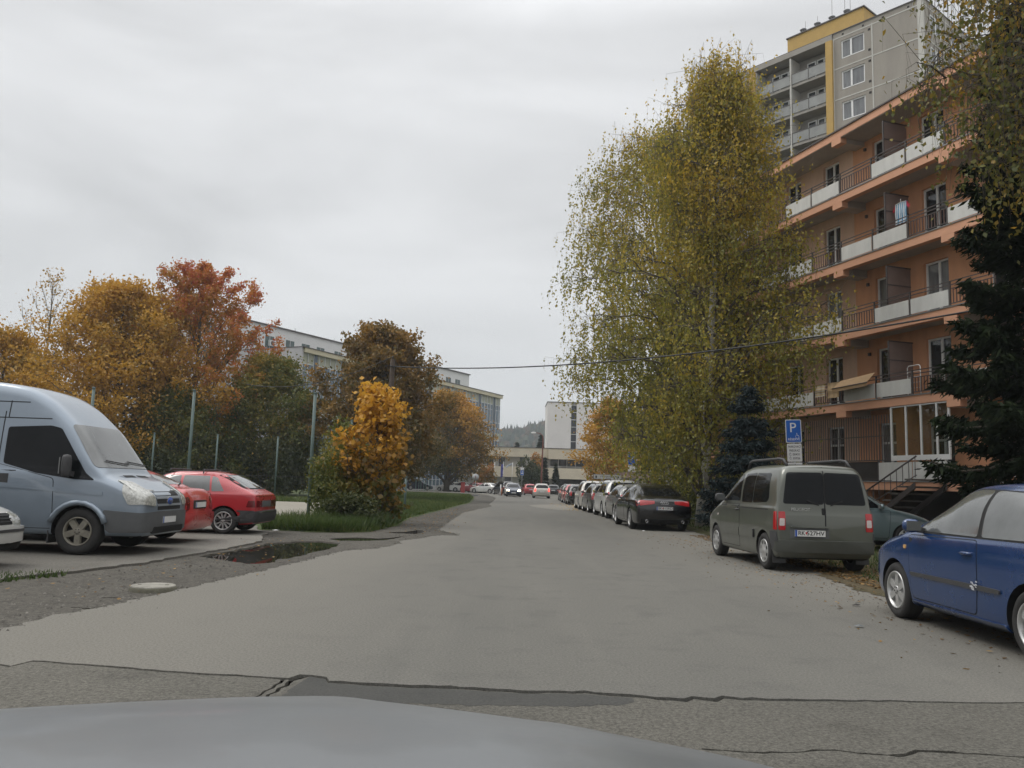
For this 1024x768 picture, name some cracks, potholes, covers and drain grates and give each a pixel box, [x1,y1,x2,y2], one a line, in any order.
manhole cover [128,583,177,593]
pothole [200,541,339,564]
